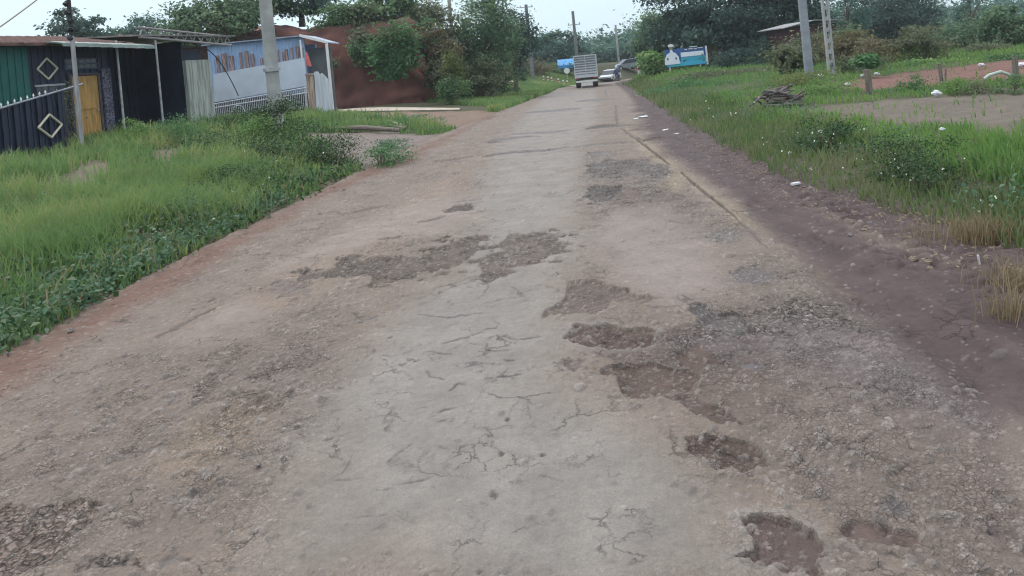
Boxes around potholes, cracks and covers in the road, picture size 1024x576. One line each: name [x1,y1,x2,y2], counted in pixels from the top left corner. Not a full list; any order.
pothole [443,202,475,213]
pothole [584,158,674,180]
pothole [449,227,587,285]
pothole [563,322,658,350]
pothole [600,361,703,399]
pothole [284,234,496,288]
pothole [0,496,105,576]
pothole [576,184,623,205]
crack [376,311,541,422]
pothole [840,513,925,547]
pothole [686,432,770,477]
